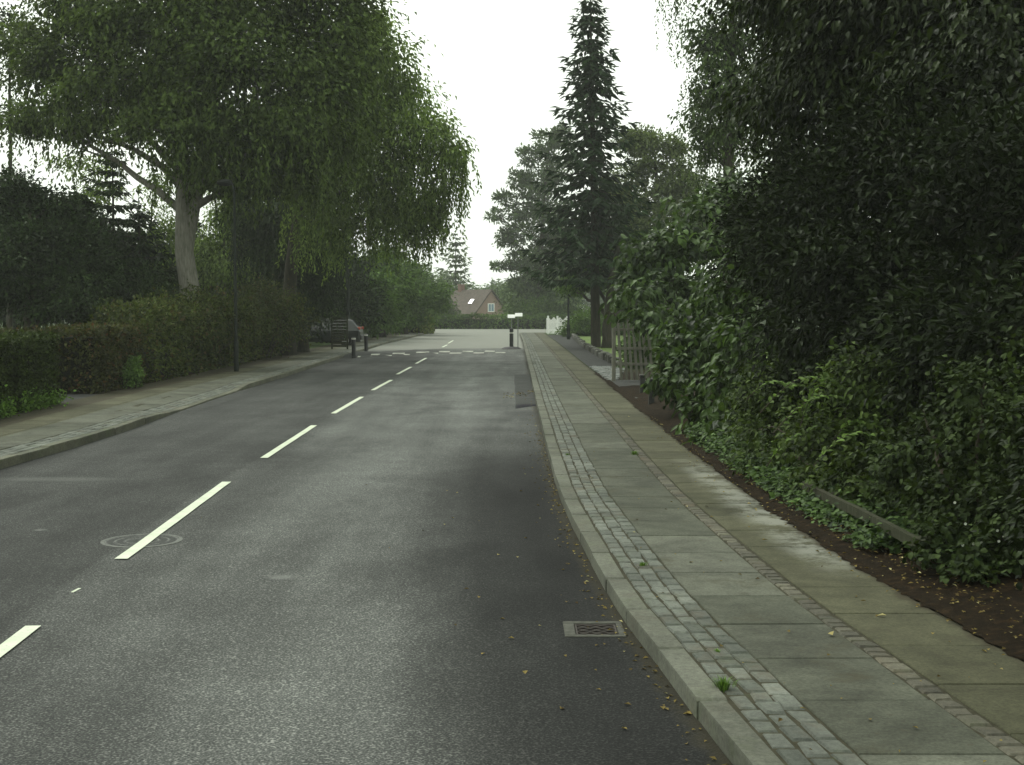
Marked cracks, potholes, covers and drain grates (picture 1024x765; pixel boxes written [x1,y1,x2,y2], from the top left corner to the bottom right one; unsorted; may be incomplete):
manhole cover [100,534,183,548]
drain grate [563,621,626,637]
